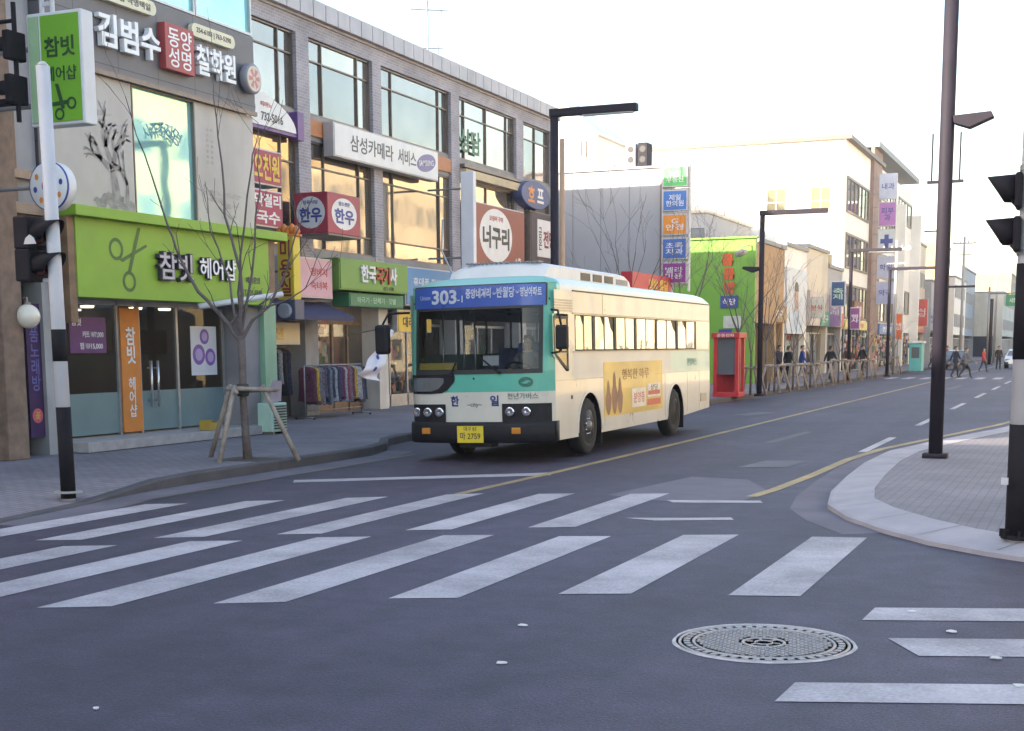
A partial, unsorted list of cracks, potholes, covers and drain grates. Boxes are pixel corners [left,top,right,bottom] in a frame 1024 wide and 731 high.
manhole cover [672,624,858,664]
